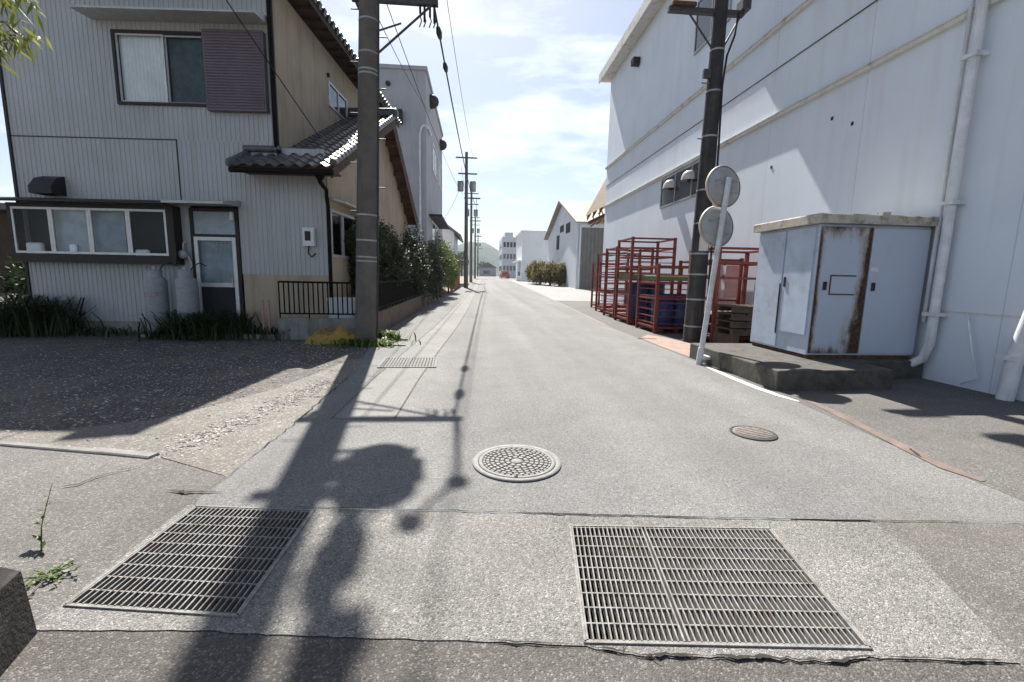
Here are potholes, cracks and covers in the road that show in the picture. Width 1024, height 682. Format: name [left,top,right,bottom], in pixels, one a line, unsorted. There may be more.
drain grate [63,505,315,618]
utility cover [729,425,778,441]
drain grate [569,525,873,650]
manhole cover [473,444,561,482]
drain grate [377,357,438,368]
